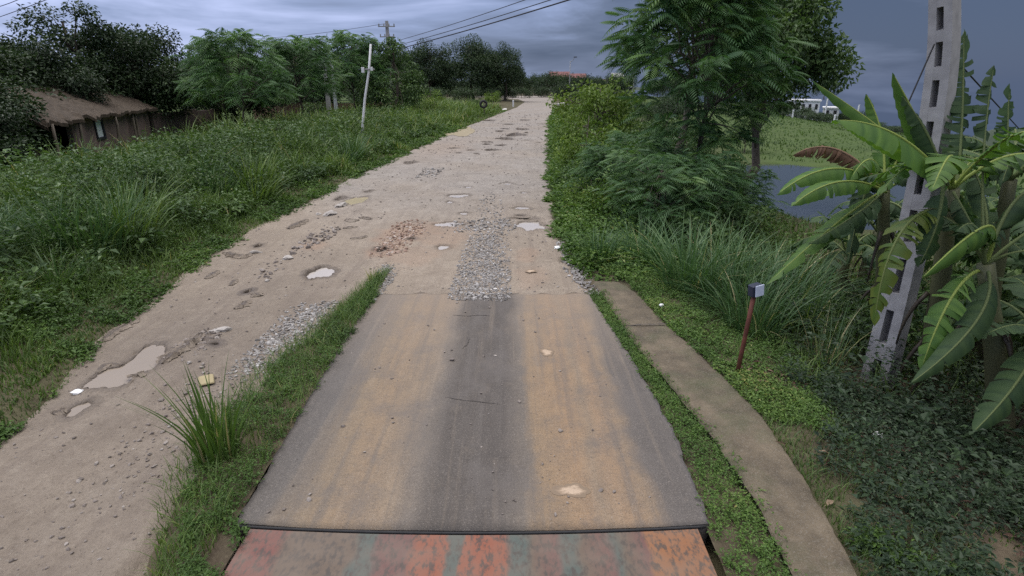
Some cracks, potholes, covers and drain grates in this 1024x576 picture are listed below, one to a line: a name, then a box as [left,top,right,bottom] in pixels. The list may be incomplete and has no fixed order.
pothole [368,245,394,254]
pothole [298,264,341,281]
pothole [70,340,174,394]
pothole [510,220,551,232]
pothole [53,395,105,424]
